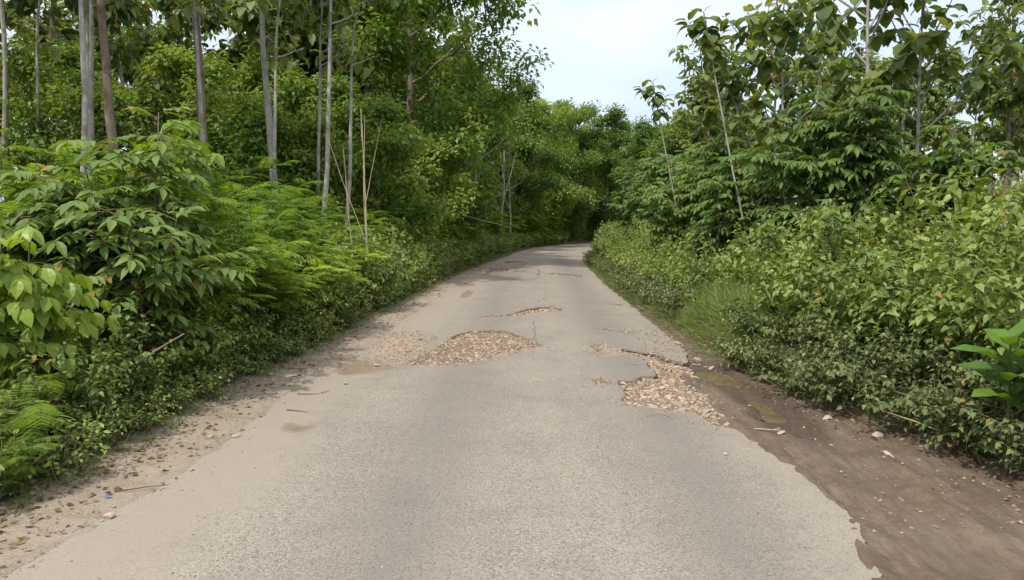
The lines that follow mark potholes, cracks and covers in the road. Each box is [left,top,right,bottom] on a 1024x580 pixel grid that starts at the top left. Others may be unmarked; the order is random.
pothole [477,268,509,276]
pothole [589,342,603,354]
pothole [618,349,730,428]
pothole [479,307,562,318]
pothole [409,330,542,366]
